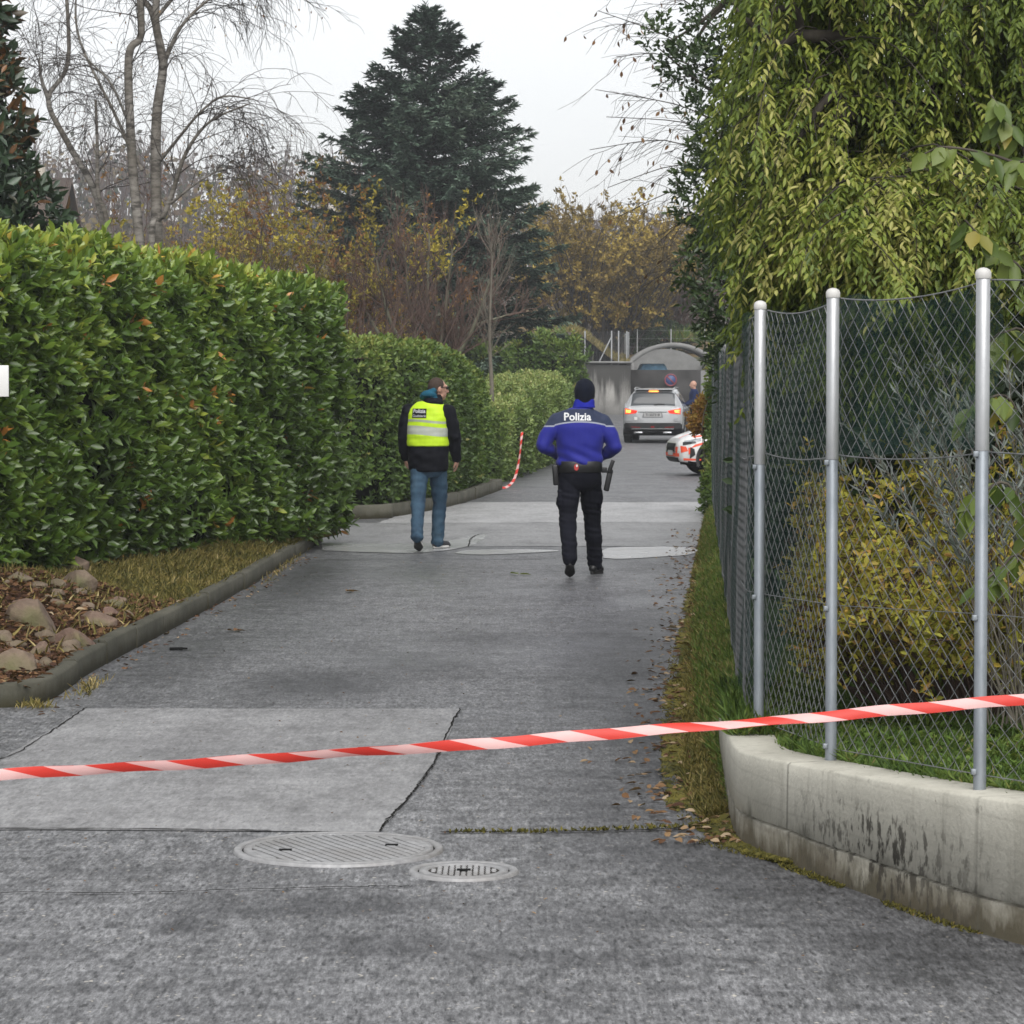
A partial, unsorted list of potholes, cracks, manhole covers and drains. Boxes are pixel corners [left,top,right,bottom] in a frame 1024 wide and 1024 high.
manhole cover [233,831,444,868]
crack [379,708,461,830]
crack [0,708,85,759]
